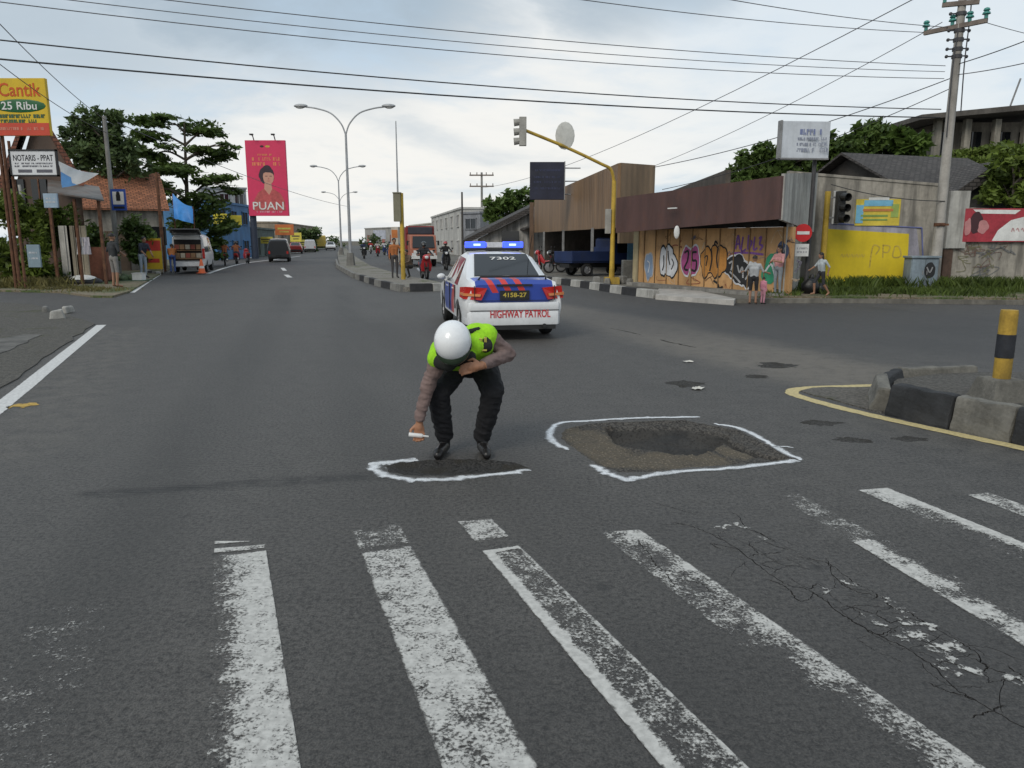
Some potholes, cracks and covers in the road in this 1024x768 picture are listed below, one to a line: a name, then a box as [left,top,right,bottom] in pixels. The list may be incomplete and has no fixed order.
crack [673,512,1024,728]
pothole [386,459,528,476]
pothole [665,380,707,388]
pothole [561,420,794,472]
